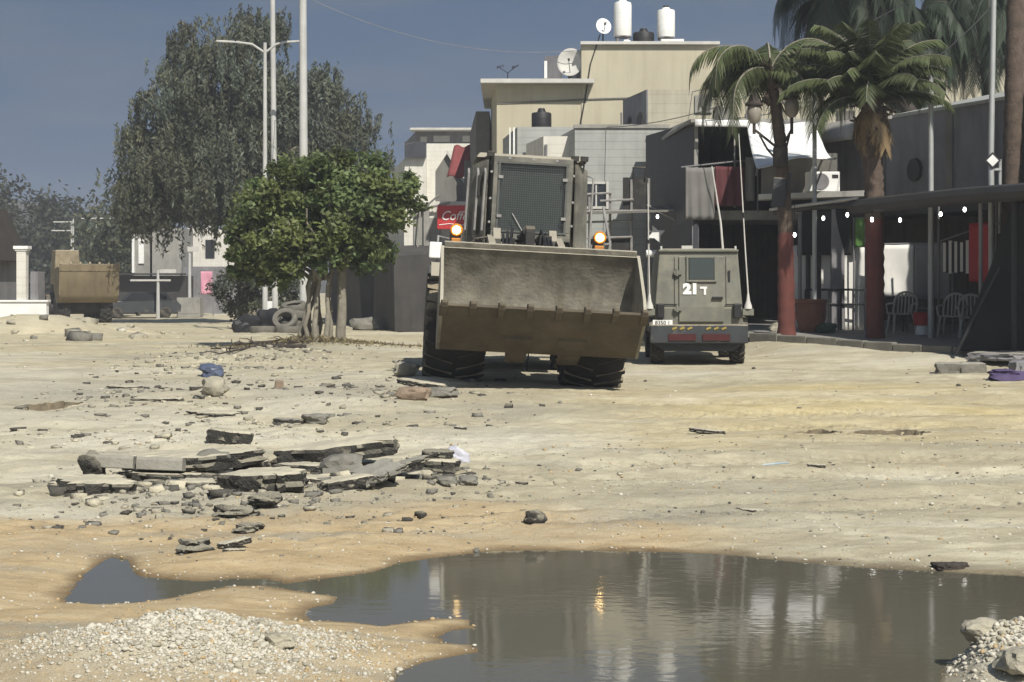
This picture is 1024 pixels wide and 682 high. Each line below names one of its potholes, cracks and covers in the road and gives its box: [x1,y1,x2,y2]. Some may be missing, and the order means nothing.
pothole [22,400,89,412]
pothole [847,429,936,437]
